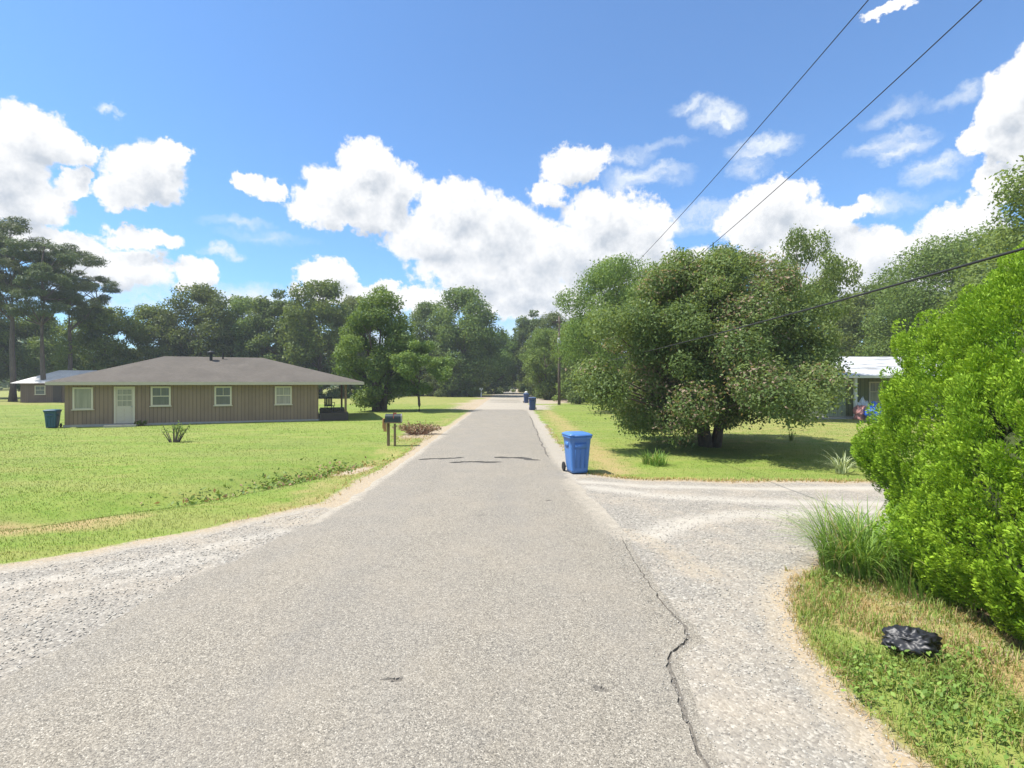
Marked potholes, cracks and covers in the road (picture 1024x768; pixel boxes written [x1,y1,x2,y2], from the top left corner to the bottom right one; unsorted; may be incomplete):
crack [621,536,711,768]
